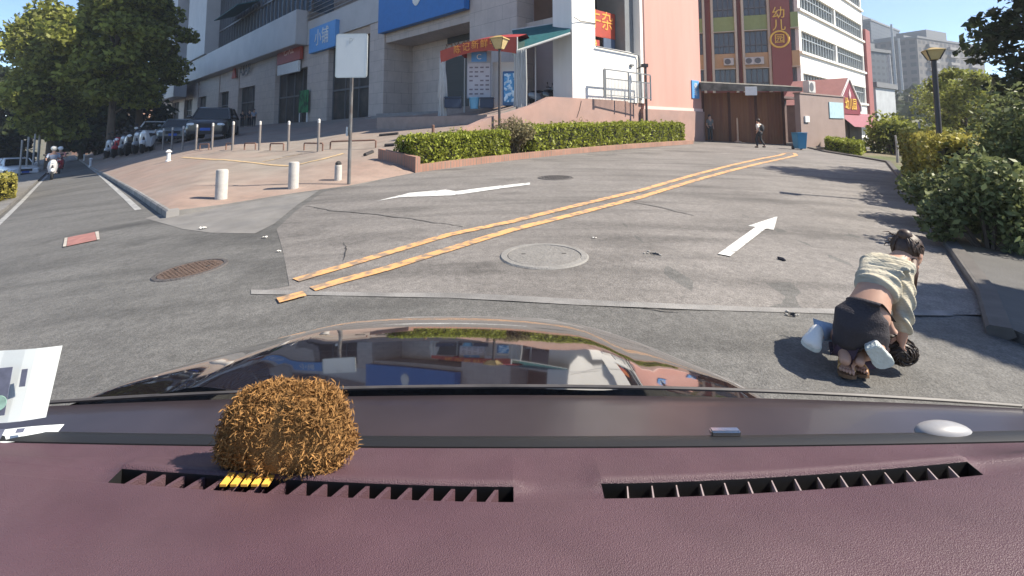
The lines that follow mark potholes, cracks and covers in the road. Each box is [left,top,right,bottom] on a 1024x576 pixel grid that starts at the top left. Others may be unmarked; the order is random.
manhole cover [500,243,589,270]
crack [311,206,463,227]
